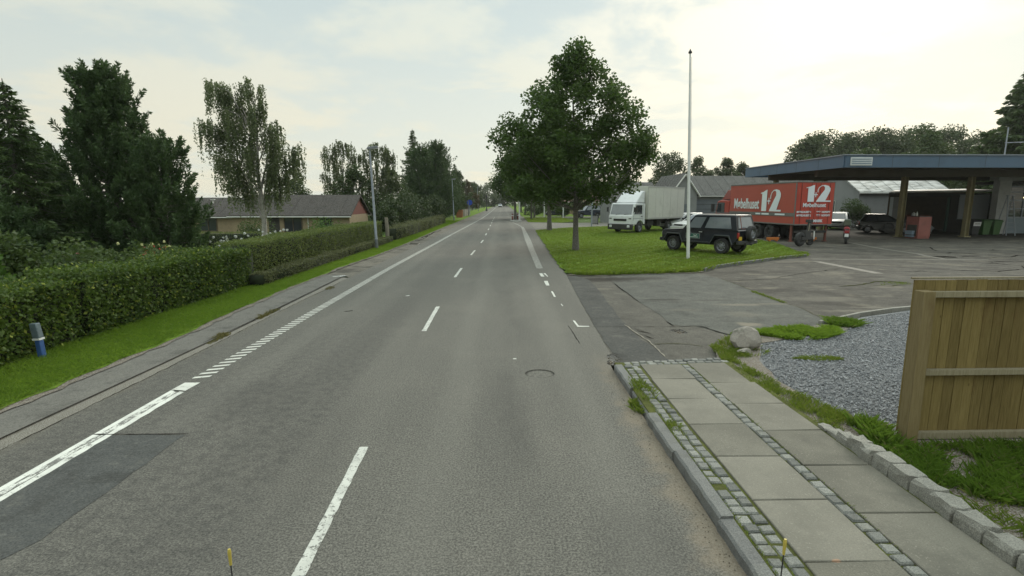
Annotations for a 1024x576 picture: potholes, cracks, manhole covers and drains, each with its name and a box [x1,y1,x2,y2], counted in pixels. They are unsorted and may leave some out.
crack [929,247,1024,272]
manhole cover [525,369,554,378]
